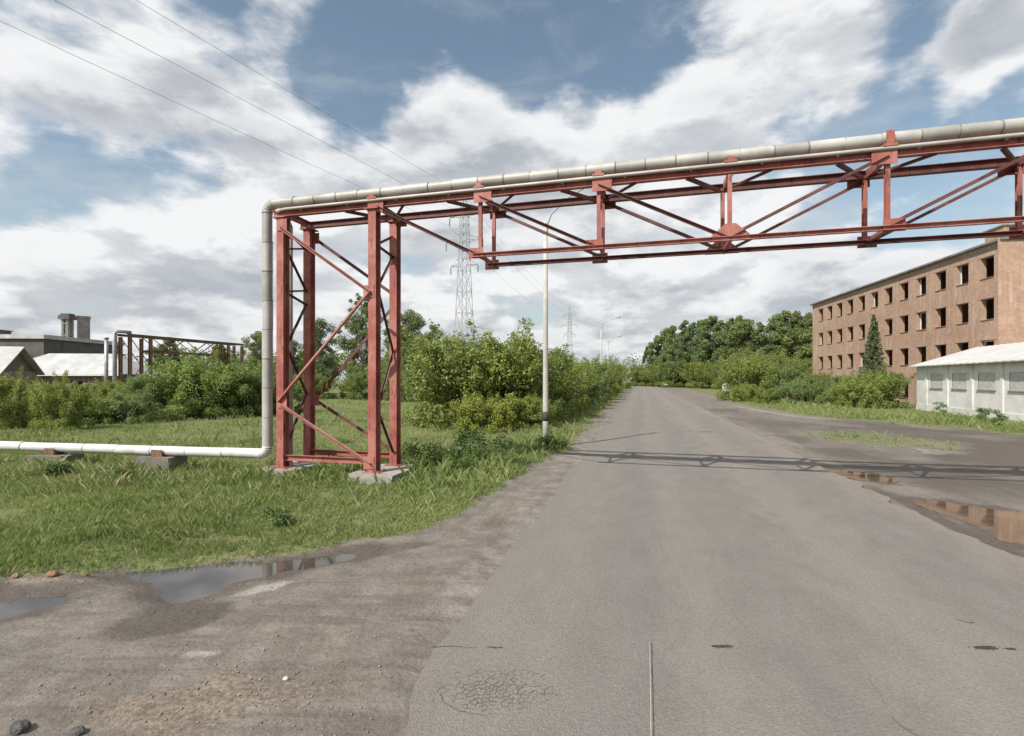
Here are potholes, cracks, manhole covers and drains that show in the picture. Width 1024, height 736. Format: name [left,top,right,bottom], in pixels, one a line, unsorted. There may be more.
crack [433,669,560,716]
crack [869,680,919,736]
